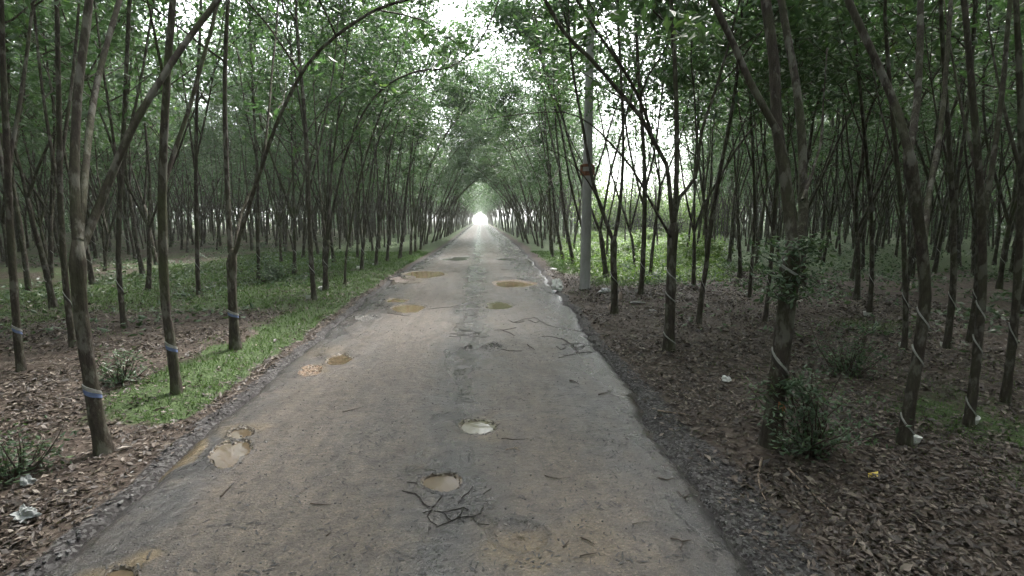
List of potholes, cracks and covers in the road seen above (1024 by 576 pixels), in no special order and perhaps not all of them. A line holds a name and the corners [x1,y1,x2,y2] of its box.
pothole [454,417,504,436]
pothole [488,279,543,288]
pothole [103,563,142,576]
pothole [387,303,430,315]
pothole [198,435,267,474]
pothole [476,300,519,311]
pothole [321,351,358,367]
pothole [397,270,453,280]
pothole [416,471,467,498]
crack [430,256,613,358]
pothole [225,425,258,441]
